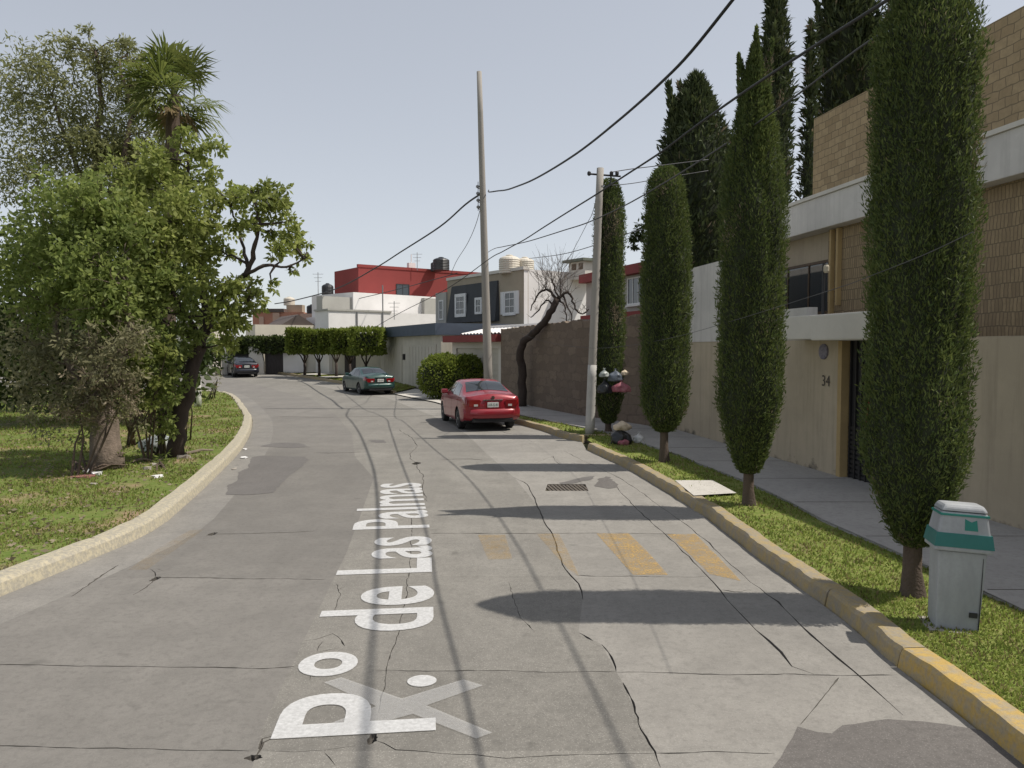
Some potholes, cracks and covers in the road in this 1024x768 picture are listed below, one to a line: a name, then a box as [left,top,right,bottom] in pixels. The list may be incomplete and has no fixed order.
crack [553,454,898,711]
crack [378,518,412,712]
crack [580,633,660,766]
crack [522,481,583,598]
